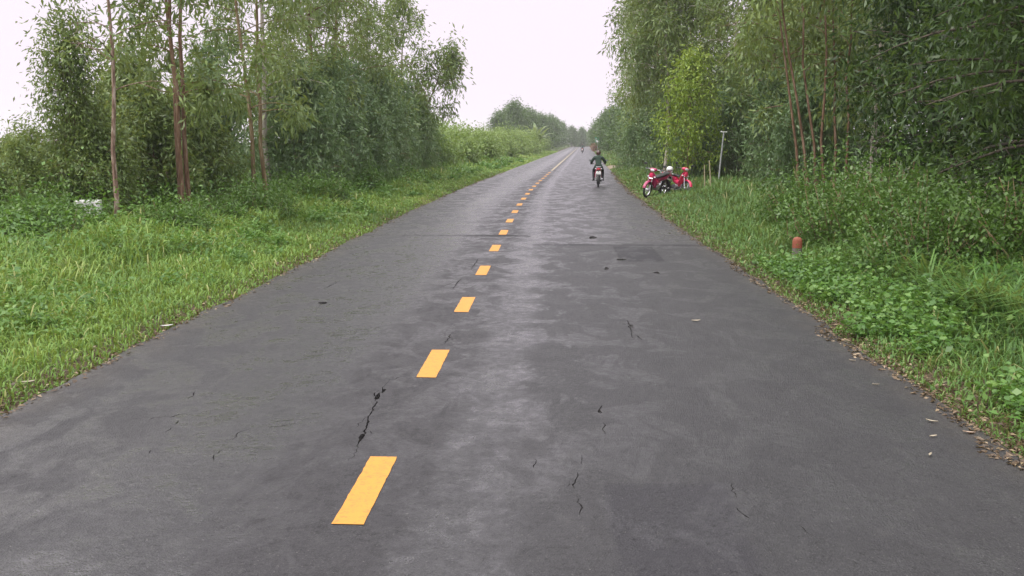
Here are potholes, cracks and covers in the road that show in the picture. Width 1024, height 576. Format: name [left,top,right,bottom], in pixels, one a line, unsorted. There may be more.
crack [348,377,399,461]
